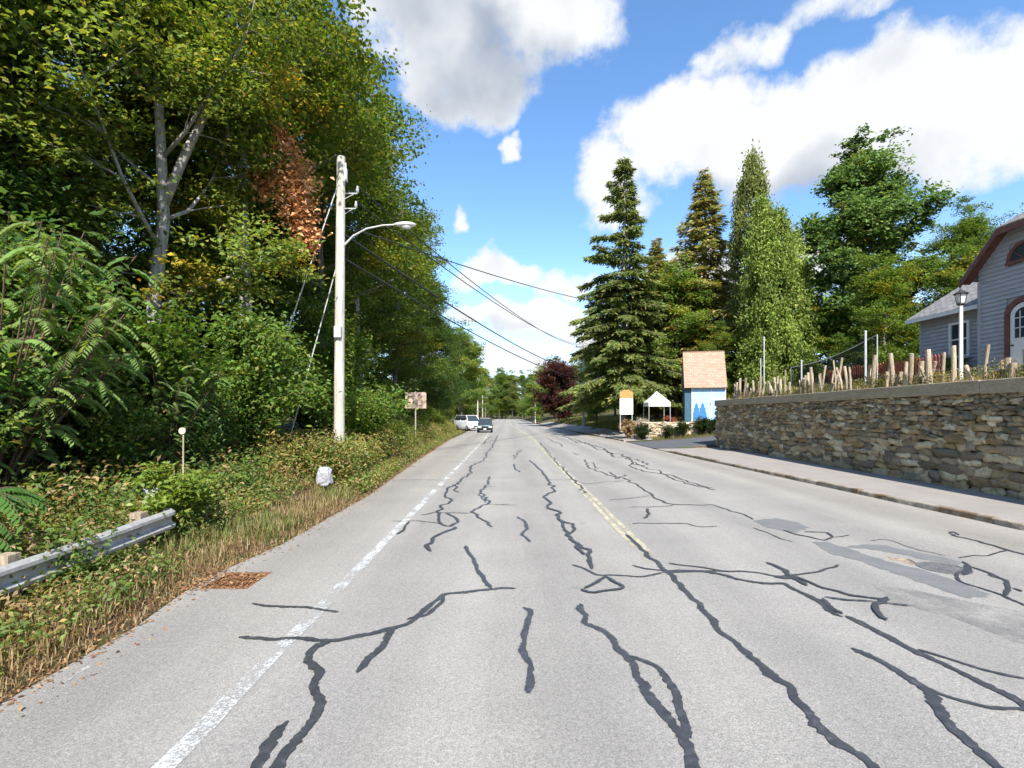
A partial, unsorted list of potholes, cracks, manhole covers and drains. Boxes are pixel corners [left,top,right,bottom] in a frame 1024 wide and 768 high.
crack [252,603,338,612]
